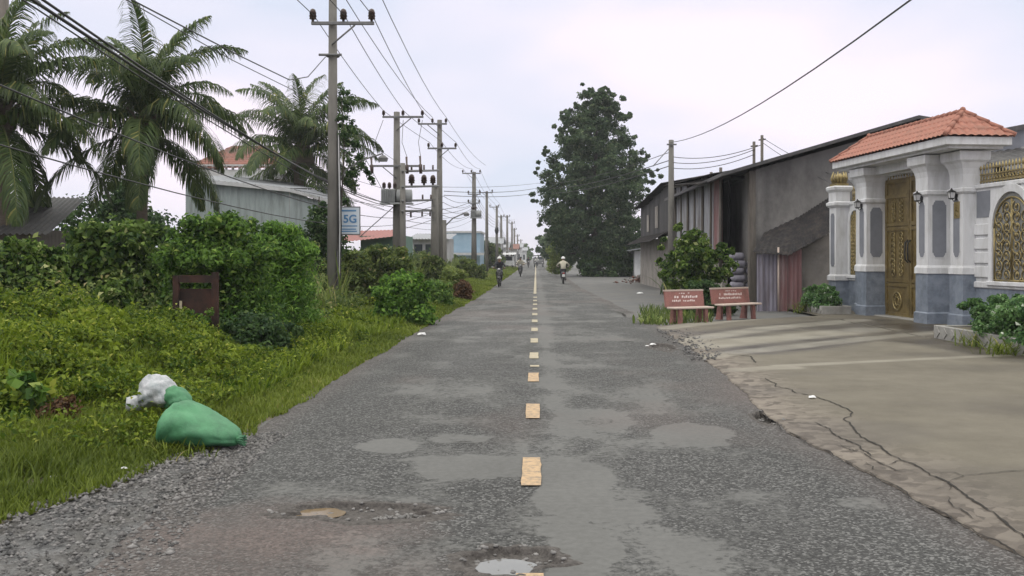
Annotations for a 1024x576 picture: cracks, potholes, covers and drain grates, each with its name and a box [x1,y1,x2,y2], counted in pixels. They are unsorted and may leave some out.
crack [758,379,1024,557]
pothole [748,410,786,427]
pothole [258,500,464,526]
pothole [445,543,584,576]
